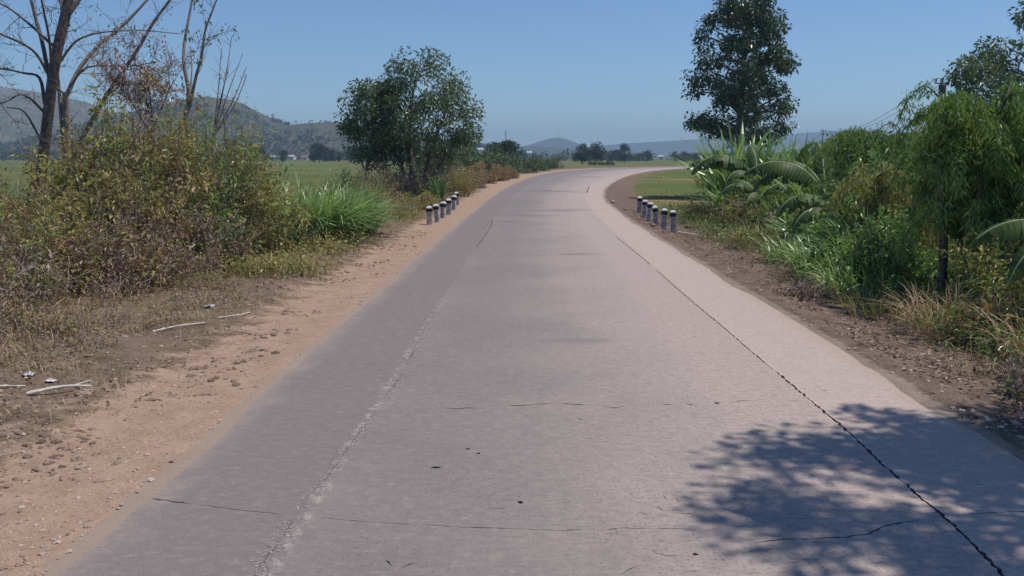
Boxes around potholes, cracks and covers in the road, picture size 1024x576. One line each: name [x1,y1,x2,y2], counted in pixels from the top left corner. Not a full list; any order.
crack [451,400,742,420]
crack [249,312,697,576]
crack [616,237,1024,576]
